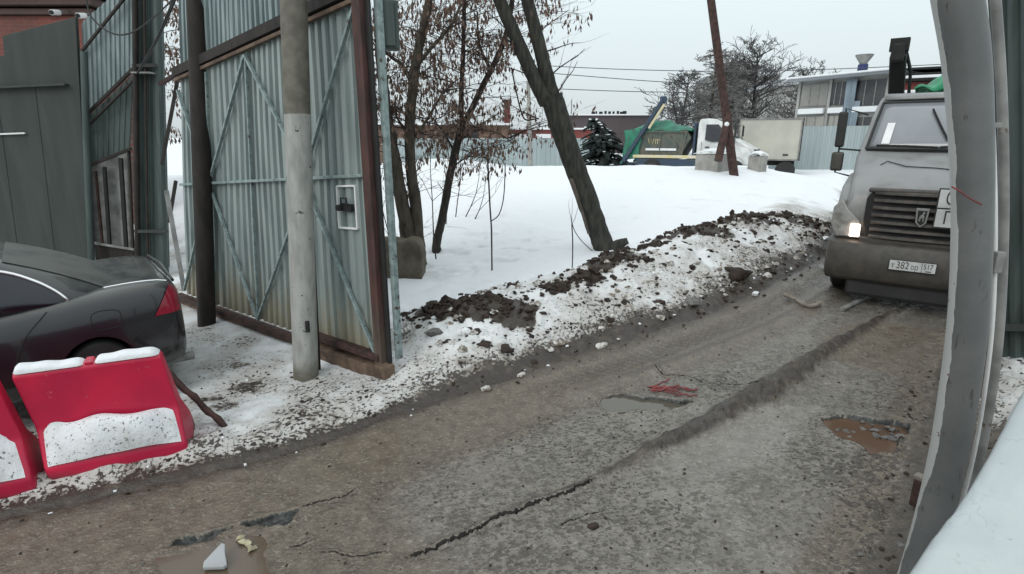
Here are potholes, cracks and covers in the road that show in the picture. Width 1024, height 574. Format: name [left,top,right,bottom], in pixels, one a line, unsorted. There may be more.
pothole [816,412,917,458]
crack [283,538,386,560]
crack [651,364,768,387]
crack [298,487,359,510]
pothole [595,392,698,416]
crack [405,475,604,563]
